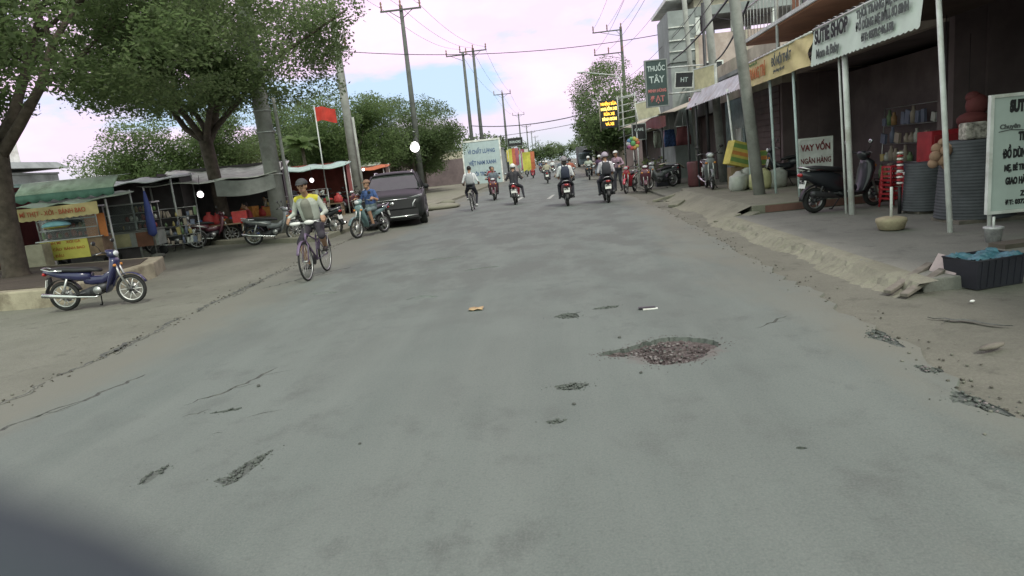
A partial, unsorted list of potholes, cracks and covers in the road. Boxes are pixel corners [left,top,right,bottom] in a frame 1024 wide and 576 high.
pothole [541,379,598,391]
crack [0,267,350,431]
crack [928,317,1013,326]
pothole [593,335,737,367]
pothole [130,464,174,487]
pothole [217,445,285,486]
pothole [905,365,944,375]
pothole [864,327,913,348]
pothole [940,387,1018,417]
pothole [206,473,241,487]
